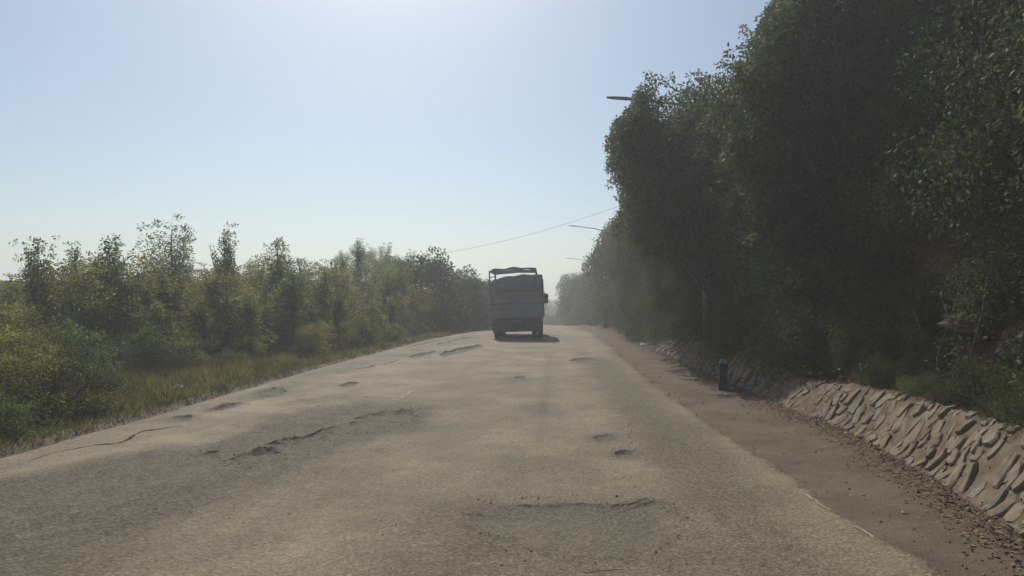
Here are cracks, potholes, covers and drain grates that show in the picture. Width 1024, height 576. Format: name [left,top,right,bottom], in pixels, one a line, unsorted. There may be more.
pothole [439,344,483,357]
crack [27,426,174,461]
pothole [349,408,420,433]
pothole [468,499,683,559]
pothole [208,402,242,411]
pothole [614,450,637,458]
pothole [262,424,345,447]
pothole [257,387,286,399]
pothole [227,446,278,464]
pothole [593,434,618,442]
